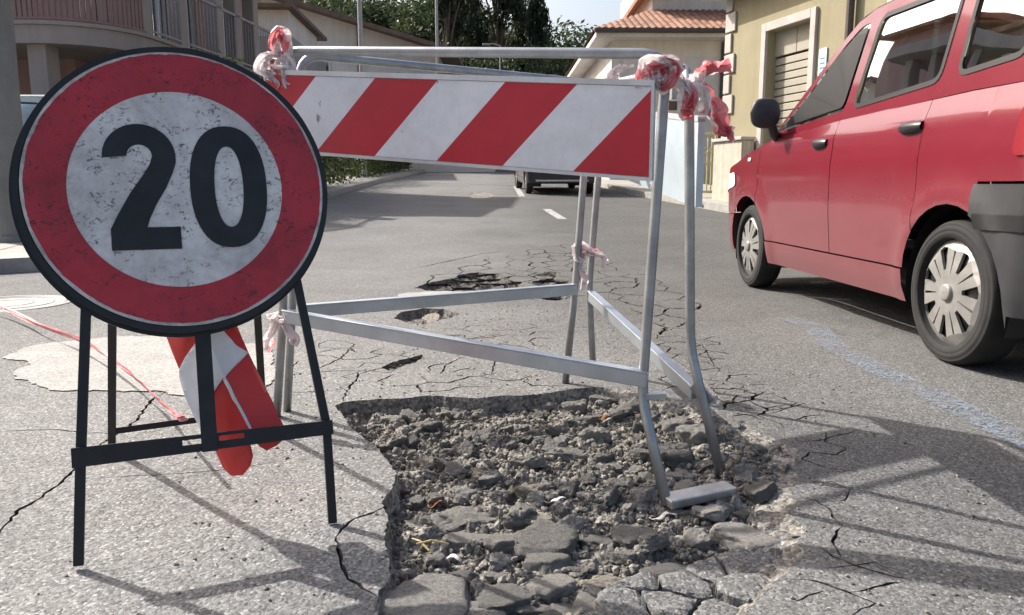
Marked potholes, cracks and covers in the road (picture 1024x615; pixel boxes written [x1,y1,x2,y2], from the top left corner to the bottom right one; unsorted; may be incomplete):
pothole [416,272,526,291]
manhole cover [0,295,71,312]
pothole [335,387,804,615]
crack [334,507,387,596]
pothole [382,355,425,371]
crack [294,323,544,402]
pothole [394,308,459,324]
crack [0,468,75,533]
crack [418,245,907,615]
crack [99,392,165,445]
